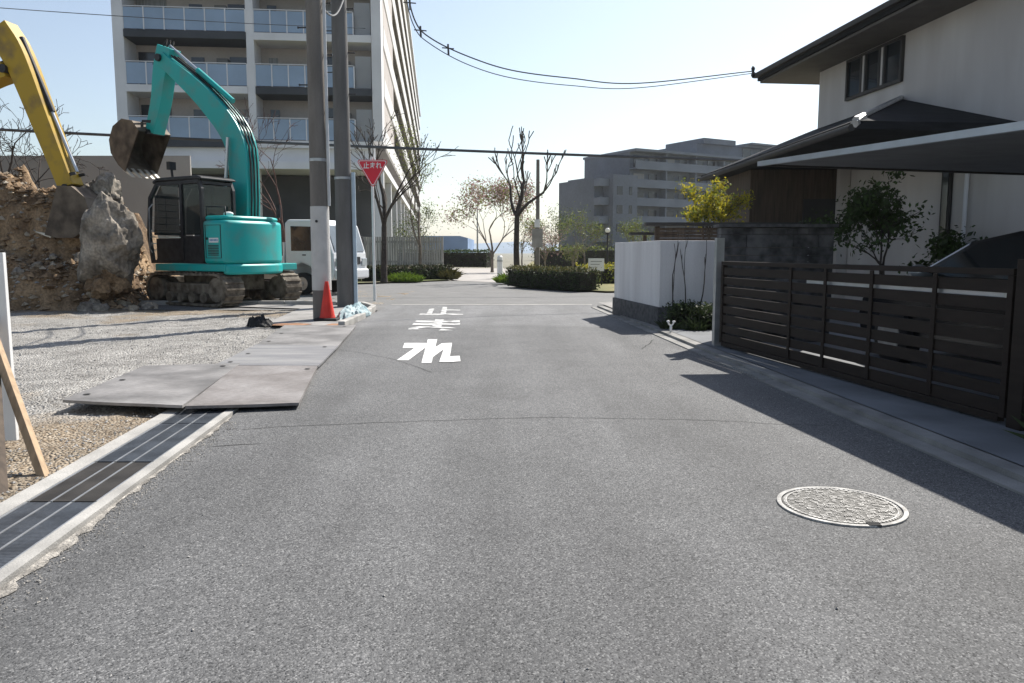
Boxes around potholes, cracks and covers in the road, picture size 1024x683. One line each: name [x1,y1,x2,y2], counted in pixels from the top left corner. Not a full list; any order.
manhole cover [776,486,909,528]
drain grate [160,408,229,424]
drain grate [27,462,152,503]
drain grate [95,423,207,463]
drain grate [0,502,95,569]
